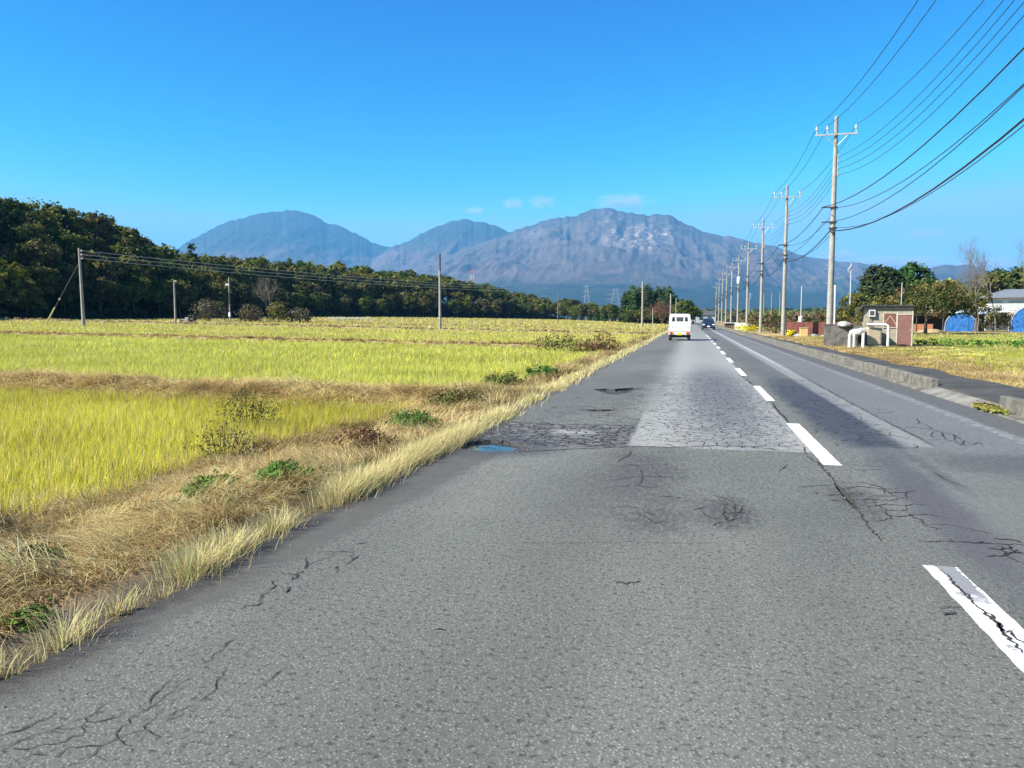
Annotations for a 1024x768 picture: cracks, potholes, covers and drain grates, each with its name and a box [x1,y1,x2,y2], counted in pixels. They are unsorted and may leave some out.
crack [241,542,365,609]
crack [769,446,1024,563]
pothole [593,387,650,395]
crack [0,678,191,760]
crack [469,370,803,523]
crack [883,409,983,445]
